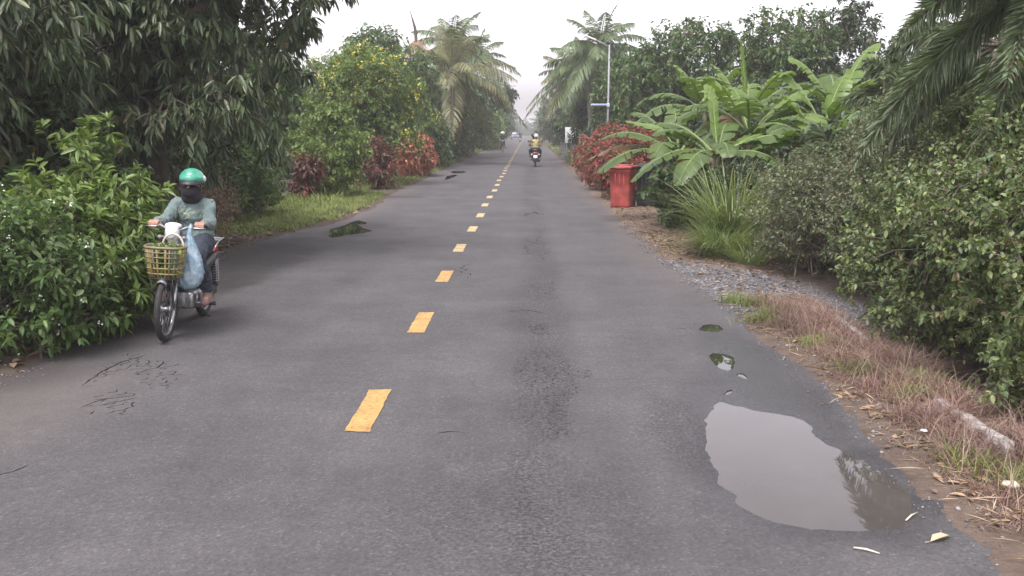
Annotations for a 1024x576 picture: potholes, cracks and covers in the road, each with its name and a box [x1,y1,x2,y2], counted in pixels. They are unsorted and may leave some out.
crack [82,354,181,415]
